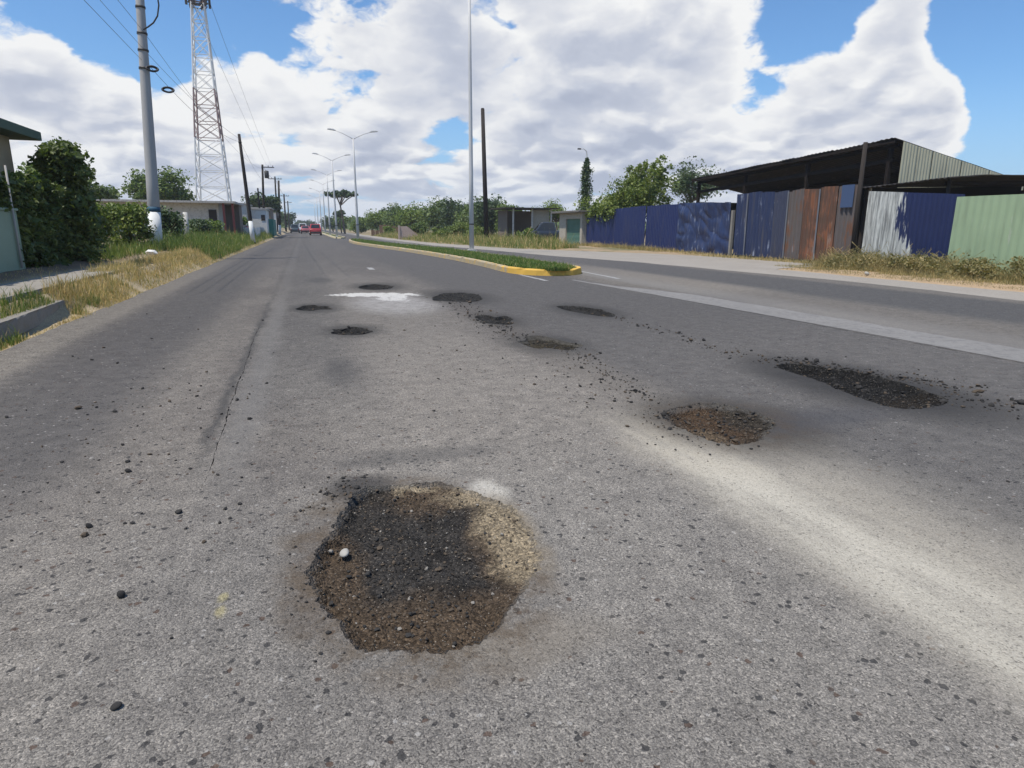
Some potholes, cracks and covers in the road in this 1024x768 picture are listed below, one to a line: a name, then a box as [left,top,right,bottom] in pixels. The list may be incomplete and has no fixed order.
pothole [304,481,544,655]
pothole [660,403,777,445]
pothole [776,363,949,409]
pothole [518,335,583,350]
pothole [475,315,514,325]
pothole [556,306,616,317]
pothole [432,293,483,302]
pothole [331,325,373,335]
crack [201,332,257,488]
